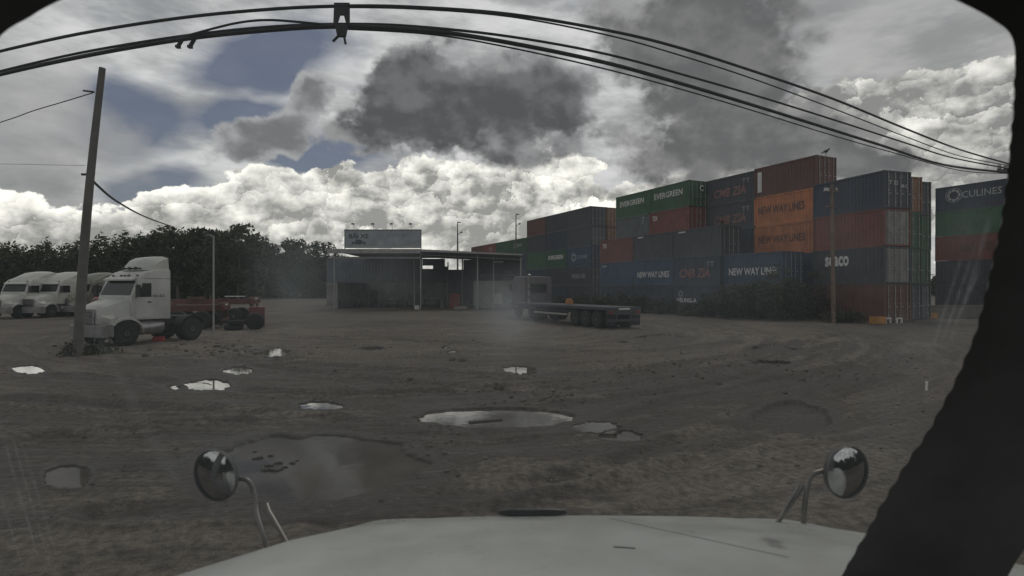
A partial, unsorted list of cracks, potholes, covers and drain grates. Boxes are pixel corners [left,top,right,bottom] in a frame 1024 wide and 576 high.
pothole [217,365,258,376]
pothole [292,399,351,411]
pothole [391,405,599,431]
pothole [169,428,462,515]
pothole [594,428,650,443]
pothole [37,463,99,491]
pothole [740,397,843,436]
pothole [256,346,295,358]
pothole [498,364,541,376]
pothole [7,363,50,376]
pothole [176,377,237,392]
pothole [565,420,628,436]
